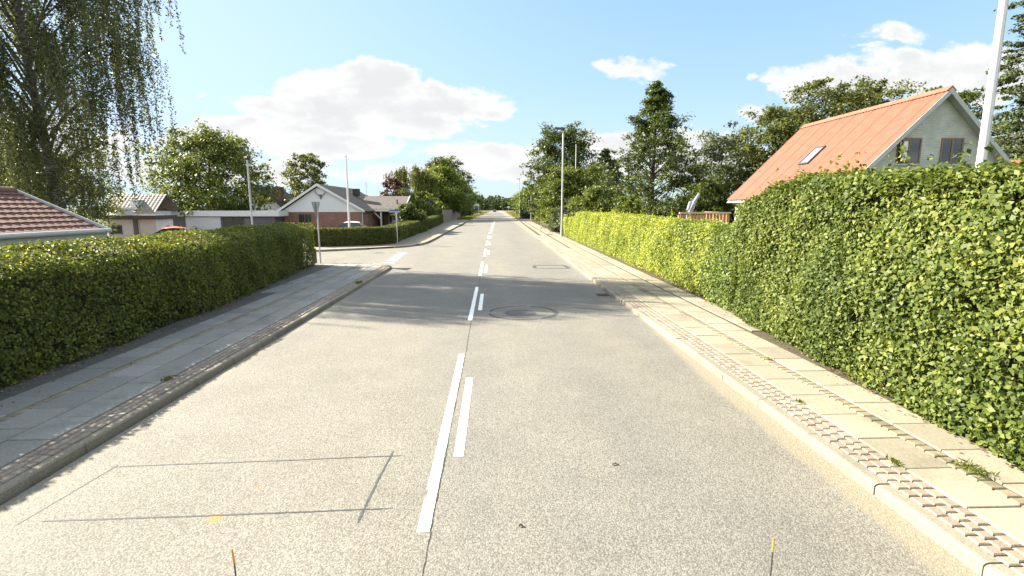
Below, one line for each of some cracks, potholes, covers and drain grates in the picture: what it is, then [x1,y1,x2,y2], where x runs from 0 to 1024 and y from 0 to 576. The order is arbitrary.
manhole cover [489,306,559,320]
